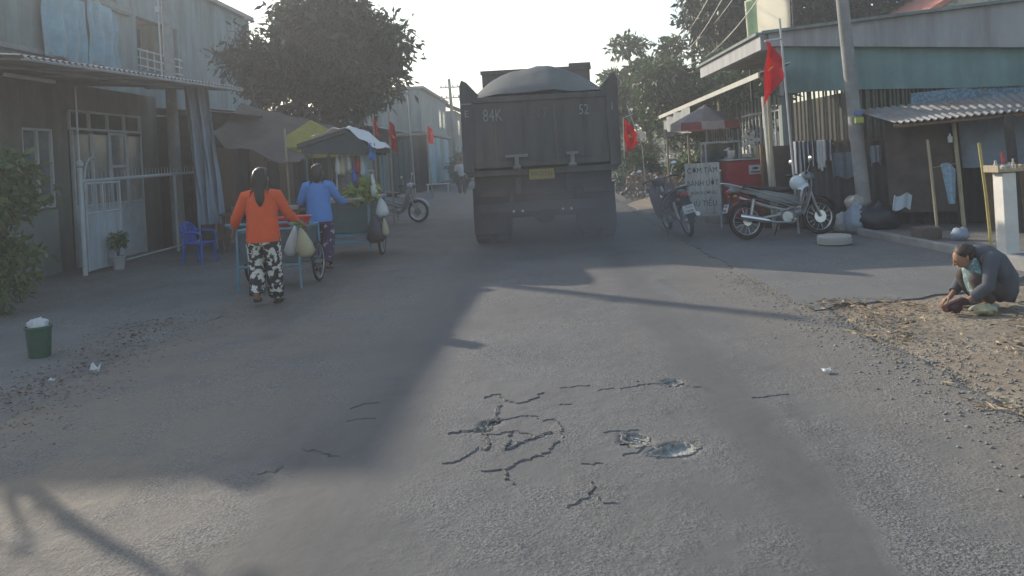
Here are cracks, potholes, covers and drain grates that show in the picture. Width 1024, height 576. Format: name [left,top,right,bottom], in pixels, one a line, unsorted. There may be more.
pothole [619,431,652,449]
crack [303,449,339,457]
crack [346,402,379,422]
crack [442,381,708,508]
crack [257,465,284,475]
pothole [646,440,703,459]
